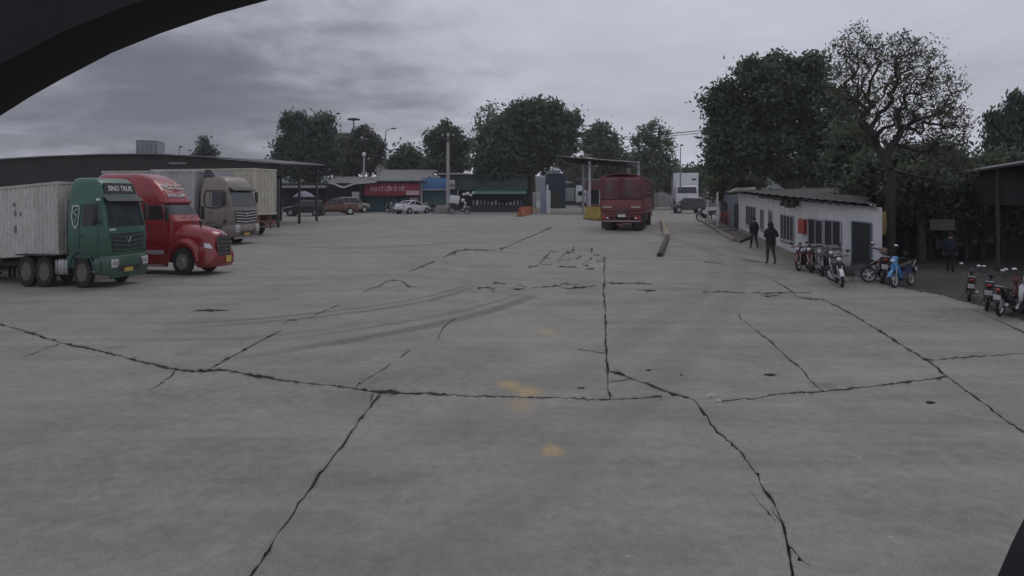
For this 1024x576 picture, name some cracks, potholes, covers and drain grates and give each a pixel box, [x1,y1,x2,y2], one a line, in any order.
crack [0,228,1018,576]
